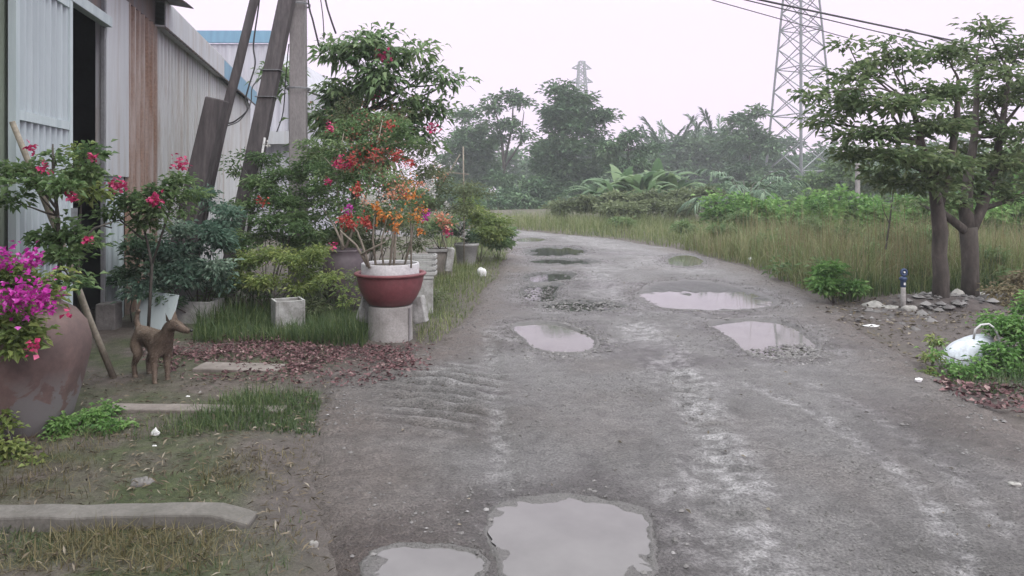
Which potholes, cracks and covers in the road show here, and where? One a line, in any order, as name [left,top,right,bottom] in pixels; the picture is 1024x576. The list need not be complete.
pothole [510,320,600,354]
pothole [665,254,705,267]
pothole [519,282,567,305]
pothole [521,246,589,257]
pothole [537,299,629,313]
pothole [358,542,491,576]
pothole [483,492,659,576]
pothole [706,318,823,358]
pothole [520,271,579,286]
pothole [634,279,782,311]
